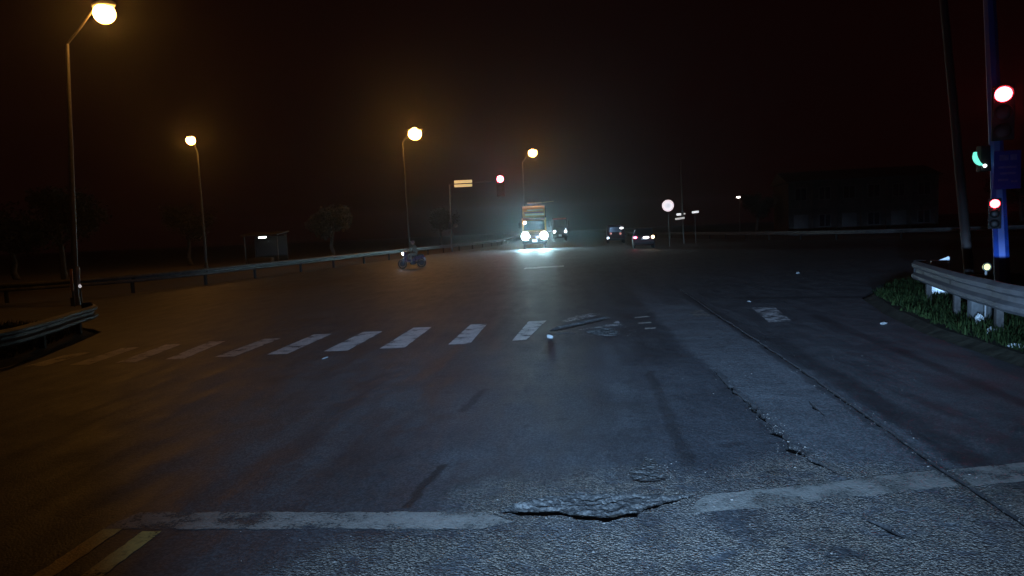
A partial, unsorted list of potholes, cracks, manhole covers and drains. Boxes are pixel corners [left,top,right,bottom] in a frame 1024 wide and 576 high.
pothole [499,493,693,522]
pothole [629,457,670,483]
crack [681,290,1024,539]
